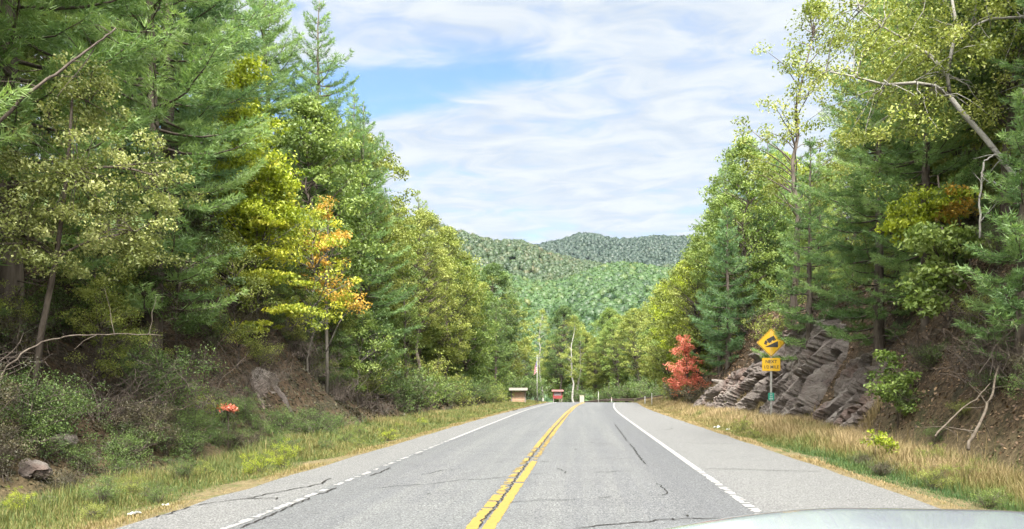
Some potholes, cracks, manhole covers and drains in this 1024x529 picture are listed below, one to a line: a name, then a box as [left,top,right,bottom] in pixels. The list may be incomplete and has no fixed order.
crack [580,514,707,528]
